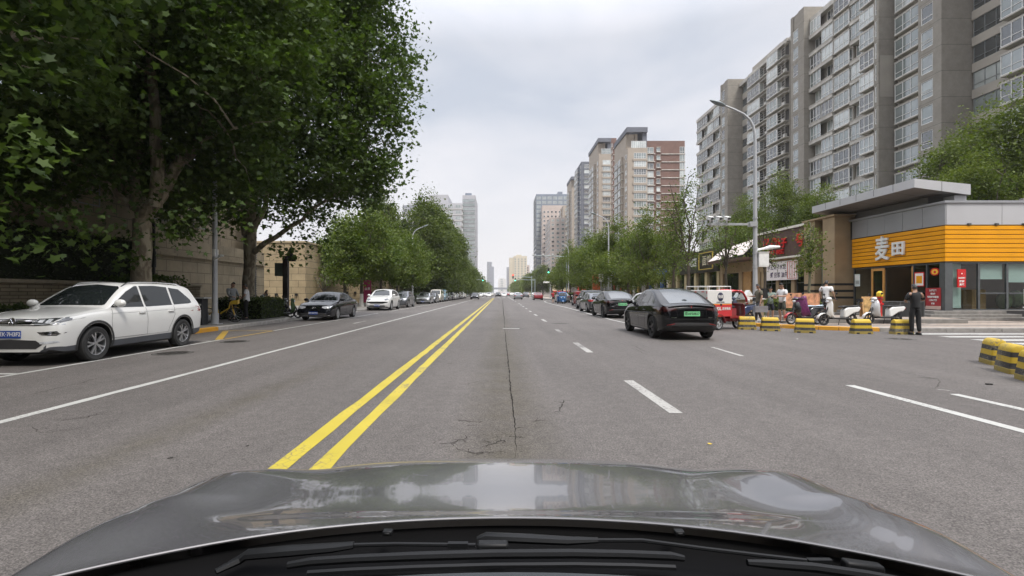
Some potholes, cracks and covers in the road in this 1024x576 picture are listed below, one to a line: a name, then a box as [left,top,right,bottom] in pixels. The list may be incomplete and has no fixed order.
crack [434,419,506,456]
